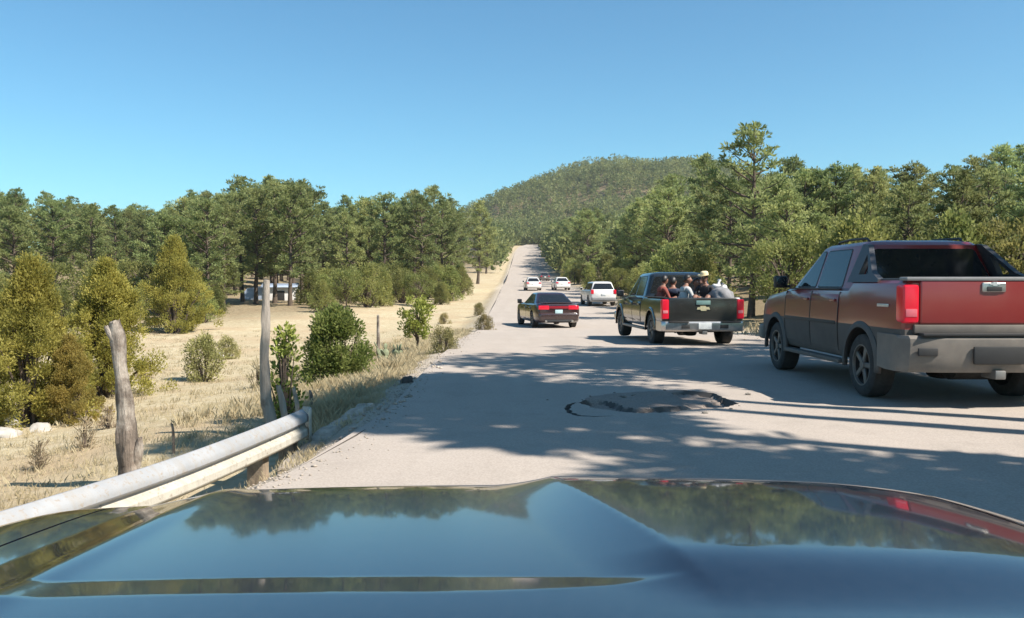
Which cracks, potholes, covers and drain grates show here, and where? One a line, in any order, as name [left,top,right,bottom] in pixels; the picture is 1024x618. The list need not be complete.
pothole [546,389,751,414]
